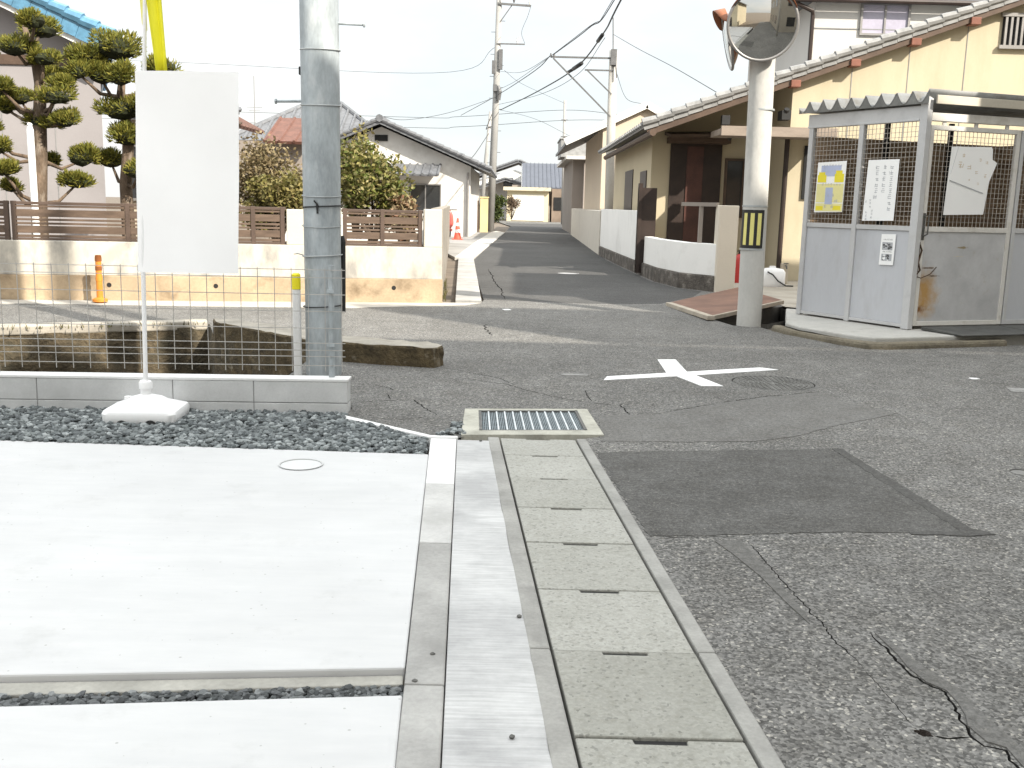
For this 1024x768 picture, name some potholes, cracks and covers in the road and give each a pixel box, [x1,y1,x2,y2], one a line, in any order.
drain grate [461,409,604,446]
crack [442,367,630,415]
crack [747,541,1020,768]
manhole cover [728,375,819,391]
utility cover [278,458,323,470]
crack [367,385,437,420]
